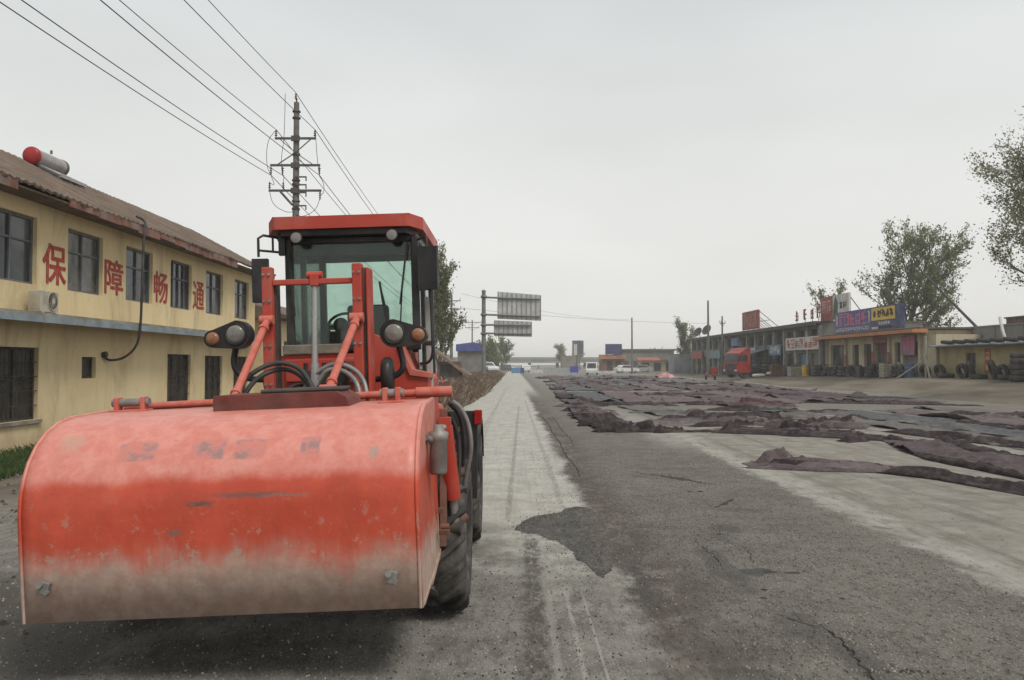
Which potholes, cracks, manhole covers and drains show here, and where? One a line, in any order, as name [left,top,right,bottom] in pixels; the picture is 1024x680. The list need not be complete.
crack [760,609,875,680]
crack [630,471,734,508]
crack [543,418,580,477]
